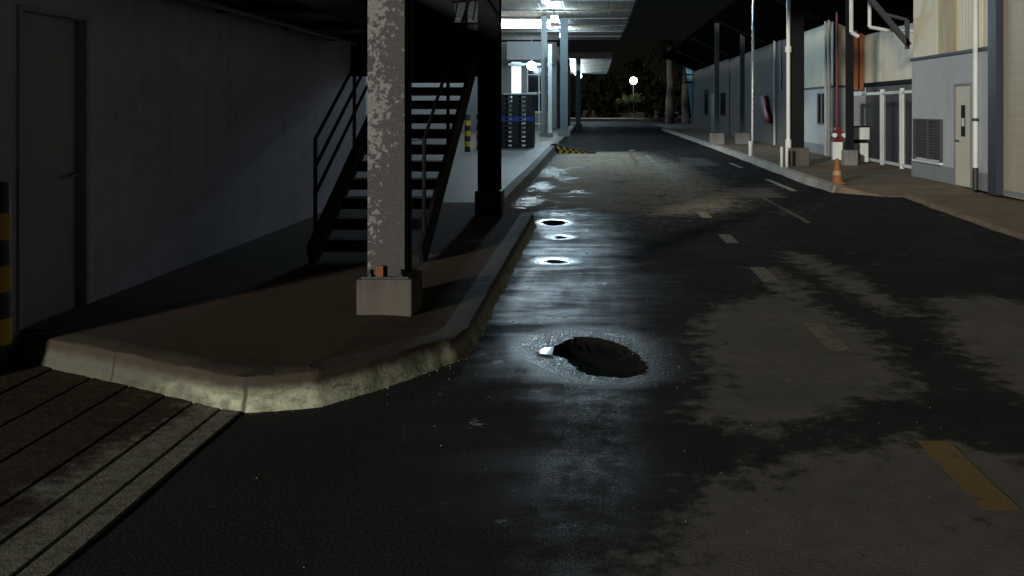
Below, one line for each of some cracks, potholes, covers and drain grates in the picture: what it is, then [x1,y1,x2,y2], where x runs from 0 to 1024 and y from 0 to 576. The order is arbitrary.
pothole [536,336,650,378]
